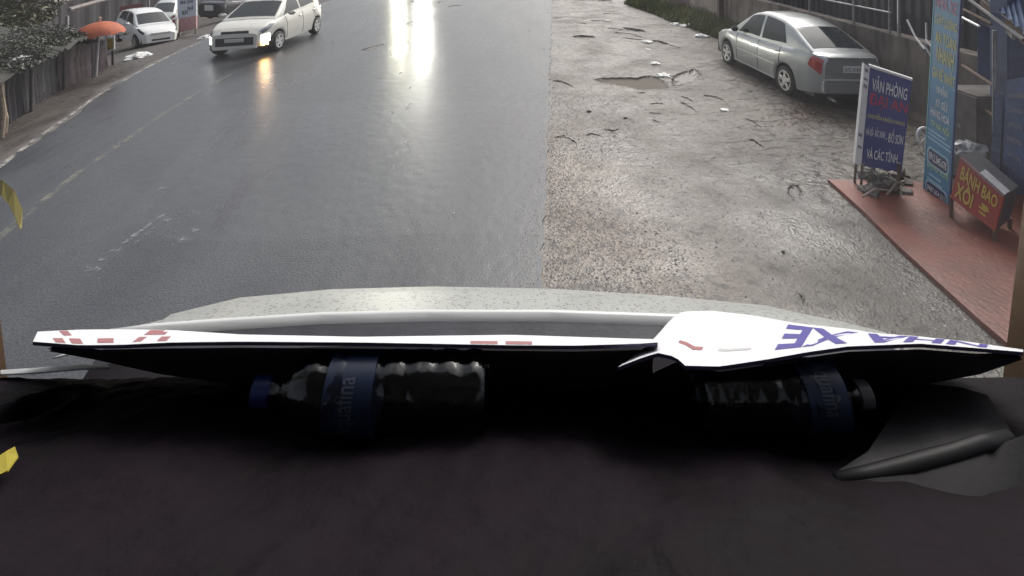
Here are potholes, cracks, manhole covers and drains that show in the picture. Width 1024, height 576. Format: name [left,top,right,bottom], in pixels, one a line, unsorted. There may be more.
pothole [592,75,669,91]
crack [553,128,621,143]
crack [637,92,726,123]
pothole [784,184,806,200]
crack [745,118,764,148]
pothole [669,69,701,86]
